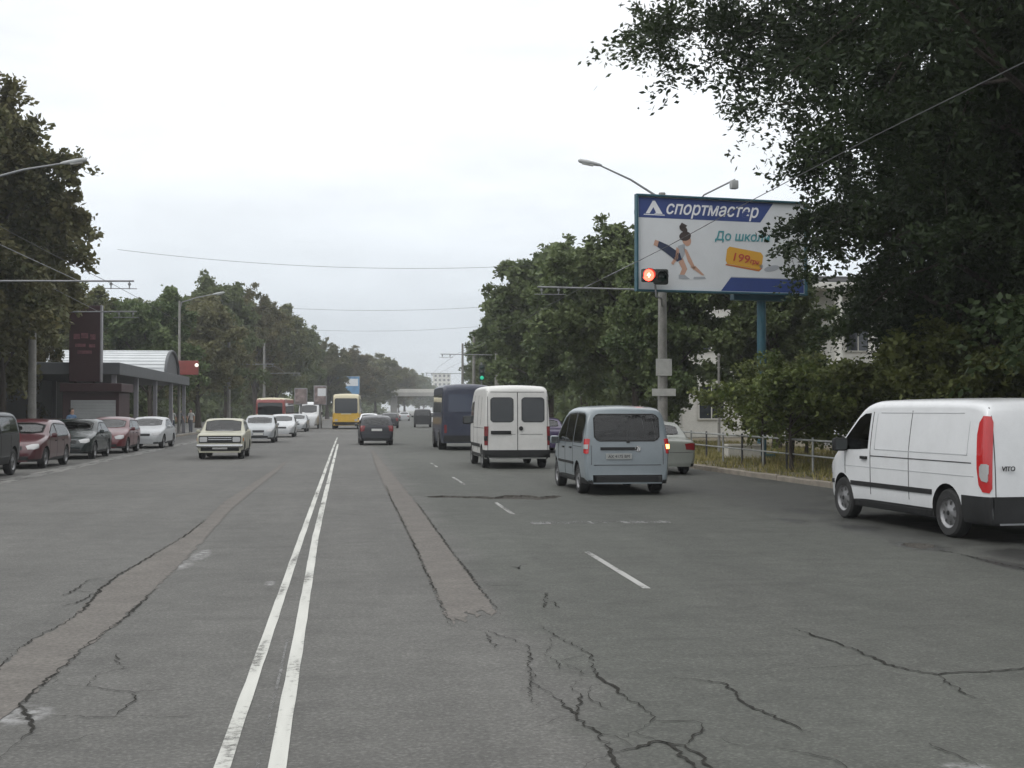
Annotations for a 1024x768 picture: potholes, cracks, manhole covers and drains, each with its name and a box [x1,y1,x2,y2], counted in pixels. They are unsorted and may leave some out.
crack [0,519,206,757]
crack [468,627,744,768]
crack [674,628,1024,733]
